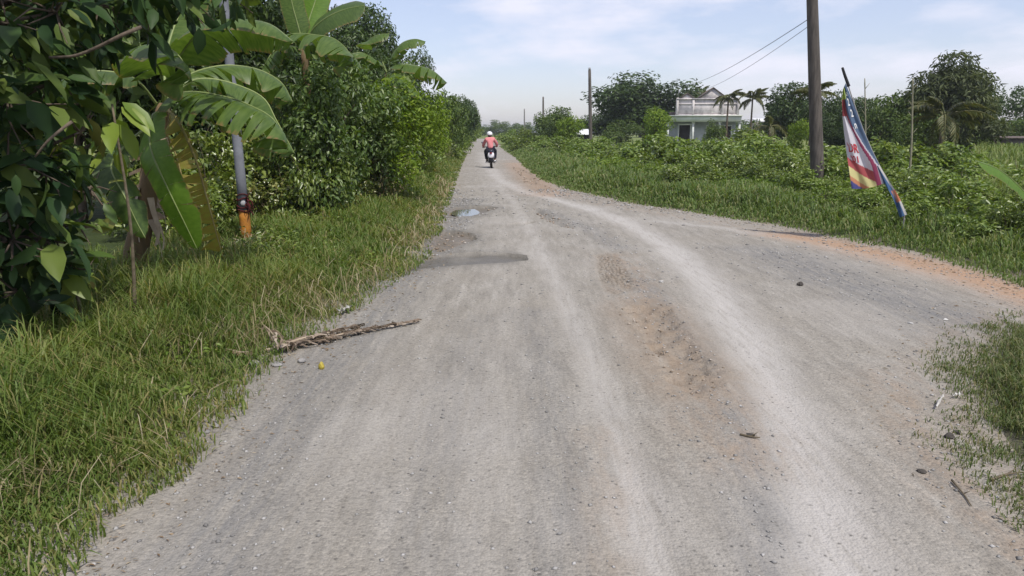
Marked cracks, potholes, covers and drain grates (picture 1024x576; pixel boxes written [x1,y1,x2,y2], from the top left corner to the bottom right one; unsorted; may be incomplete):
pothole [446,205,499,217]
pothole [427,230,478,252]
pothole [530,207,576,229]
pothole [615,302,728,396]
